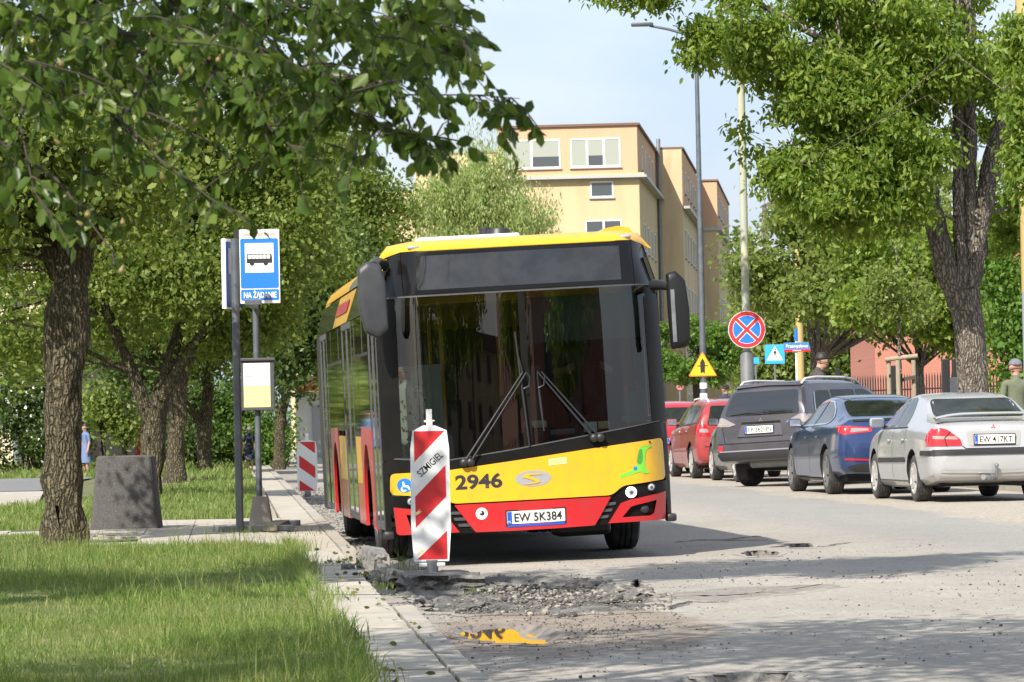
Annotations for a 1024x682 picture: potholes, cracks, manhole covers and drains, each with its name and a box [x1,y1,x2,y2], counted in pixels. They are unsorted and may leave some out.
pothole [394,575,663,617]
pothole [437,621,578,646]
pothole [661,669,809,682]
